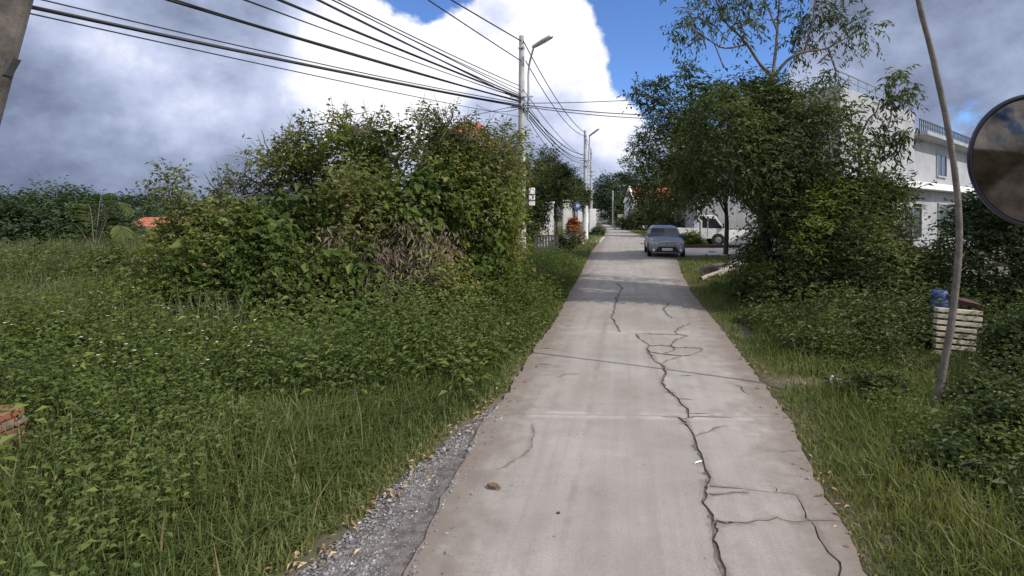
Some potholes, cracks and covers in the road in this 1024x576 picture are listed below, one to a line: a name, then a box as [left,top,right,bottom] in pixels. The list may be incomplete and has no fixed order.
crack [610,284,842,576]
